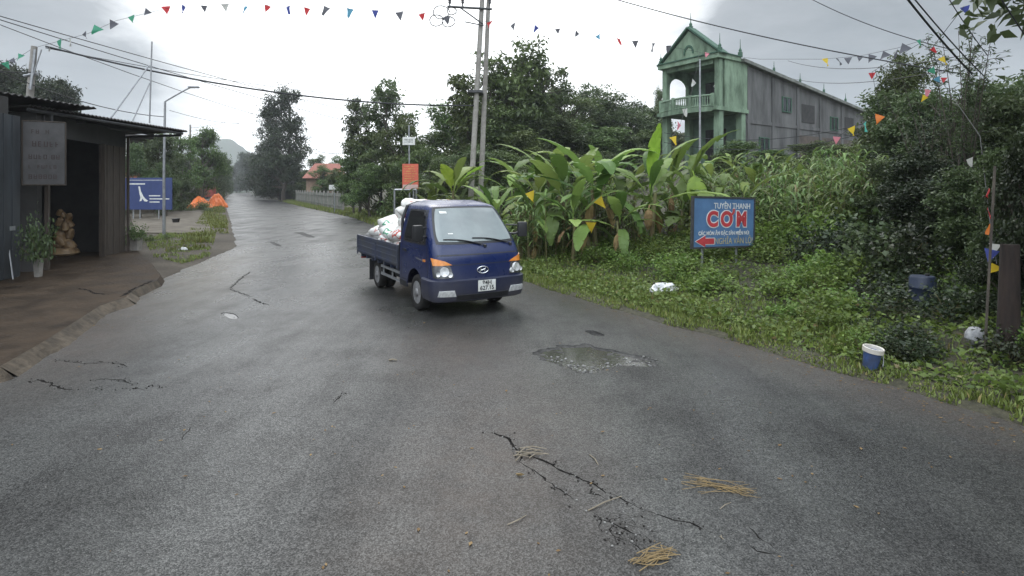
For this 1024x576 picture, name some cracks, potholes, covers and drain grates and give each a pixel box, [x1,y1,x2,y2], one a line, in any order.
crack [482,432,716,551]
crack [28,359,162,390]
pothole [531,343,658,374]
